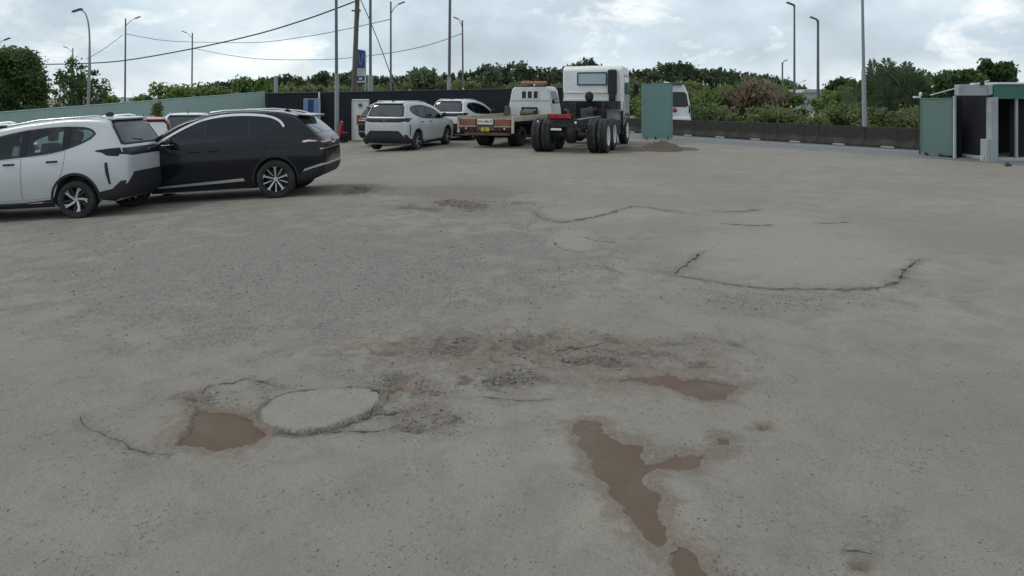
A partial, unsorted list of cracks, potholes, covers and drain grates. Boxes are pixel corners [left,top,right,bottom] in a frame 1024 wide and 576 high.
crack [533,206,673,243]
pothole [659,541,710,576]
pothole [589,371,742,402]
pothole [435,335,481,358]
pothole [561,355,640,368]
pothole [845,557,875,573]
crack [663,251,920,291]
pothole [481,372,535,388]
pothole [401,422,451,434]
pothole [508,335,554,352]
pothole [380,377,415,403]
crack [202,378,404,436]
